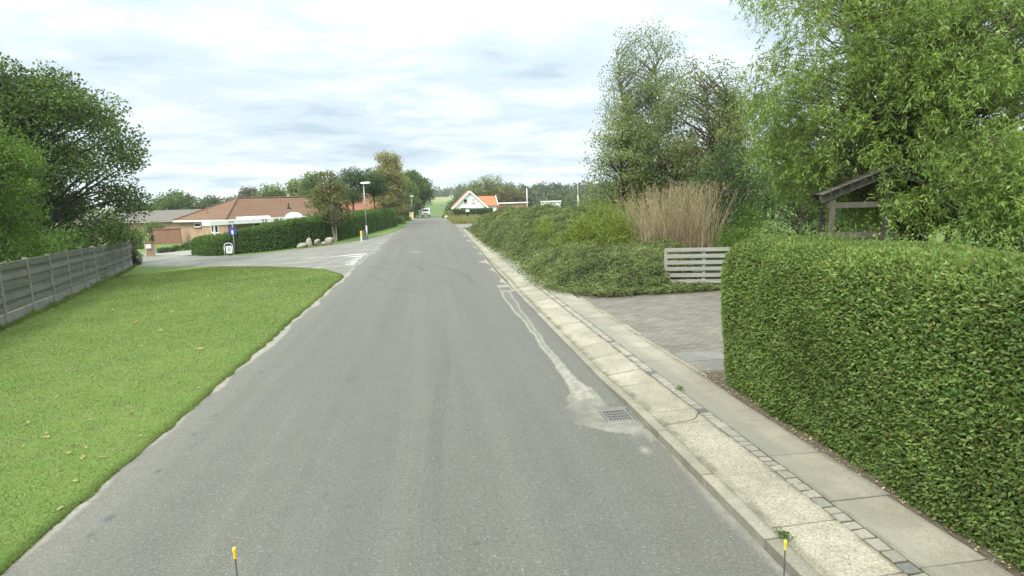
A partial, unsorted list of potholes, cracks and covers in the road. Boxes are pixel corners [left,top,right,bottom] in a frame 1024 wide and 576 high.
drain grate [599,409,636,422]
